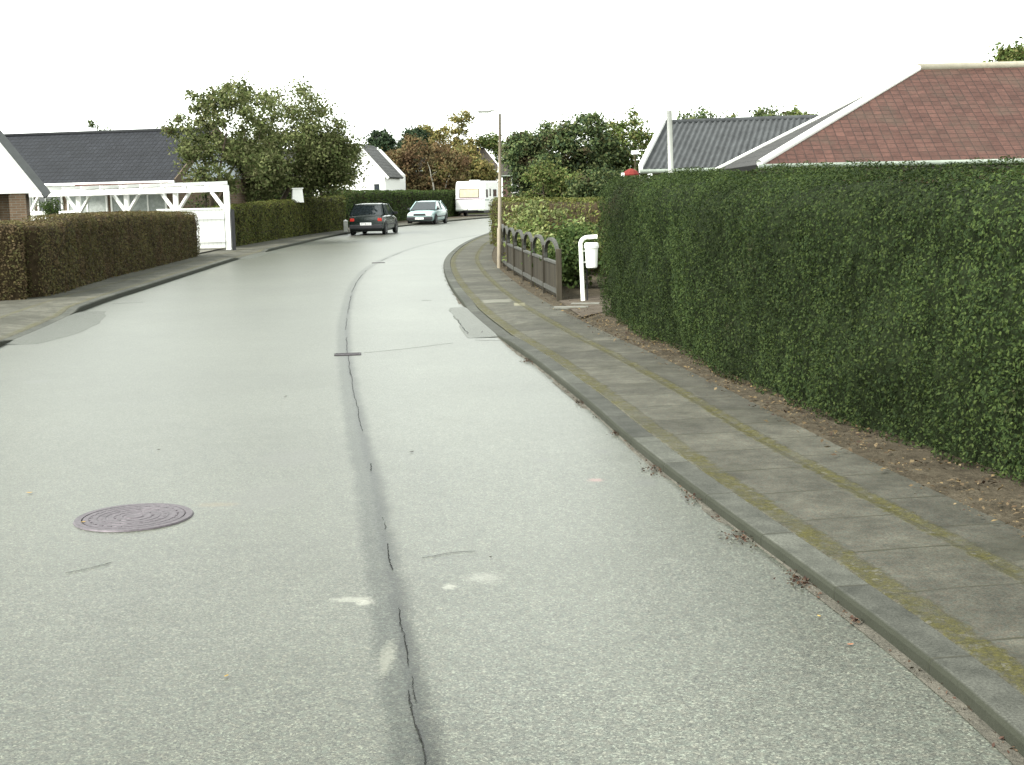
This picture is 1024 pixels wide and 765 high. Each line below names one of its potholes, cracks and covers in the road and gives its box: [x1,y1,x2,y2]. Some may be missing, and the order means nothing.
manhole cover [73,503,194,532]
crack [345,253,427,765]
